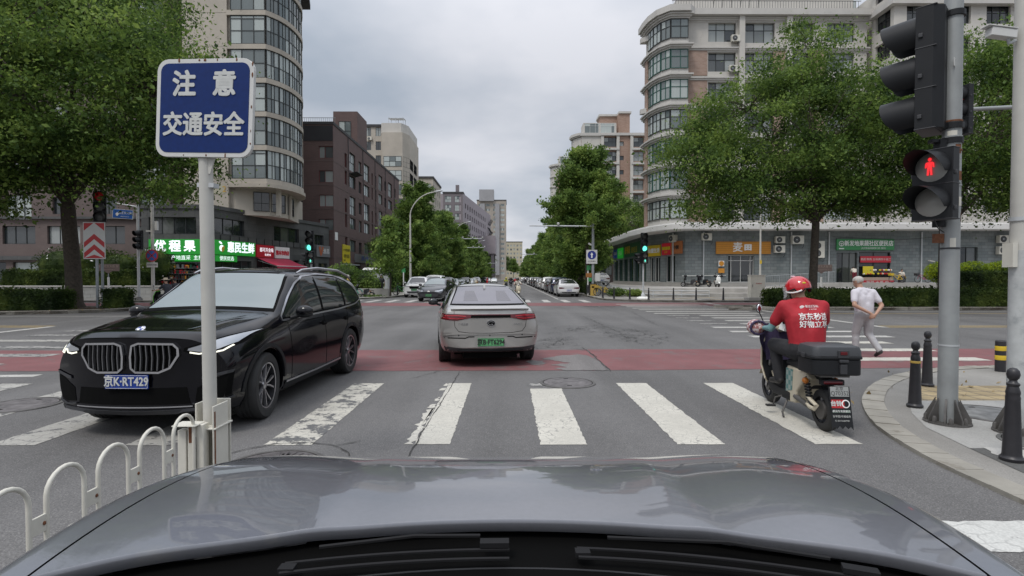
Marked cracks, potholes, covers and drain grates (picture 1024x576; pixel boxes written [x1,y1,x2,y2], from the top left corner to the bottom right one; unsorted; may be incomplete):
manhole cover [540,377,596,389]
crack [231,440,360,456]
manhole cover [0,397,63,413]
crack [535,311,668,371]
